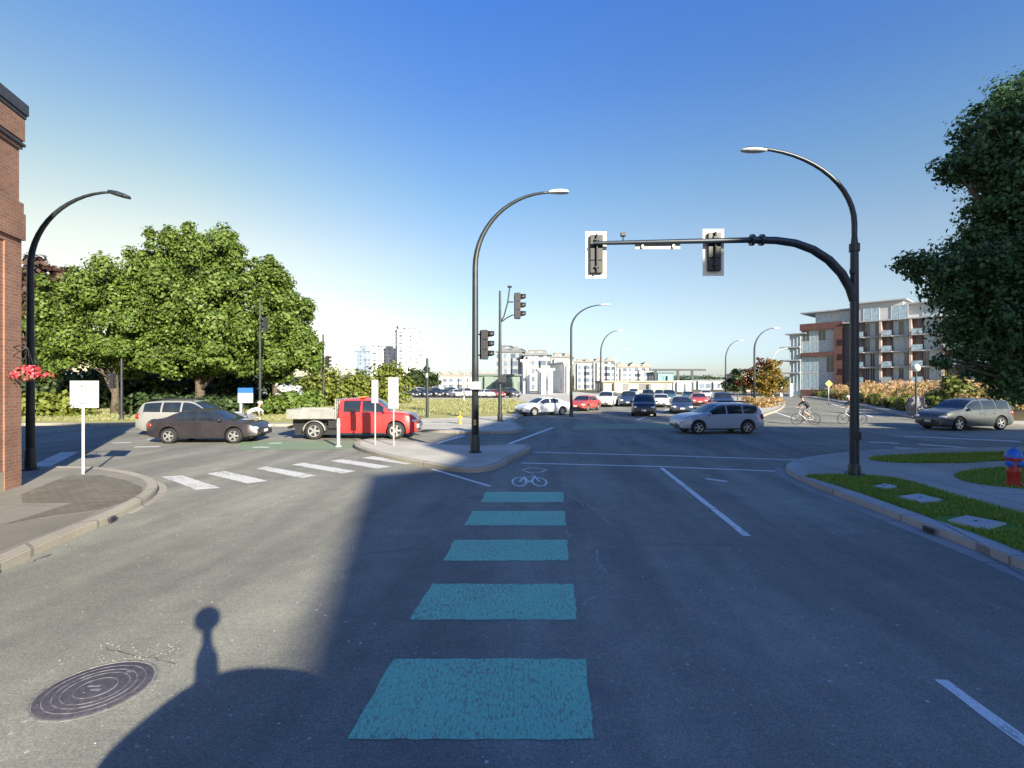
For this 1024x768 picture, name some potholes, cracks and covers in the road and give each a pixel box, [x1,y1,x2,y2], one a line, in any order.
utility cover [947,515,1006,529]
crack [566,531,613,573]
manhole cover [25,660,159,723]
utility cover [900,493,942,504]
